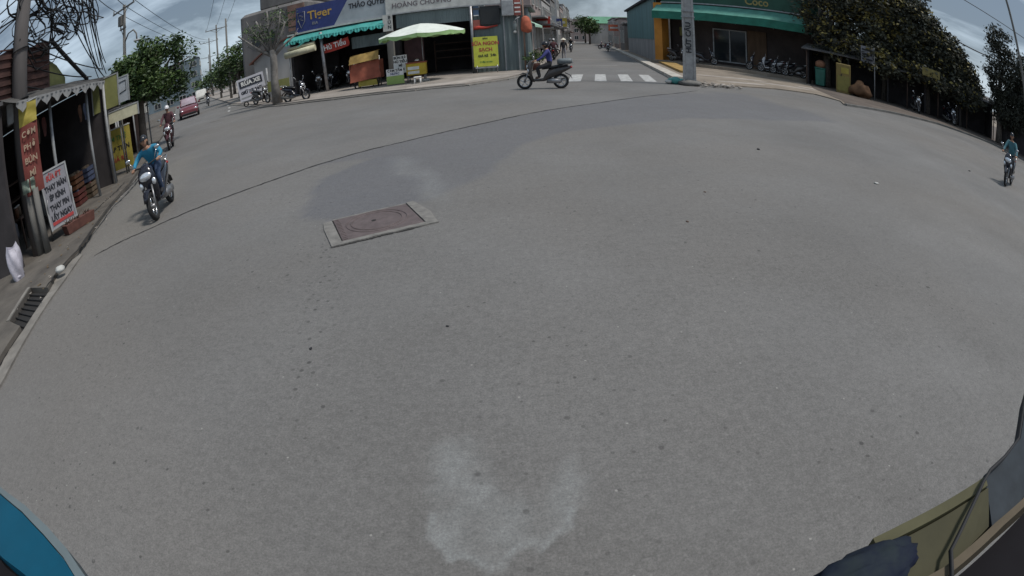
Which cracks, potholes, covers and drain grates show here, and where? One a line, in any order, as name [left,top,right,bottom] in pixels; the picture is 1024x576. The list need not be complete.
manhole cover [323,201,439,247]
drain grate [6,287,47,331]
